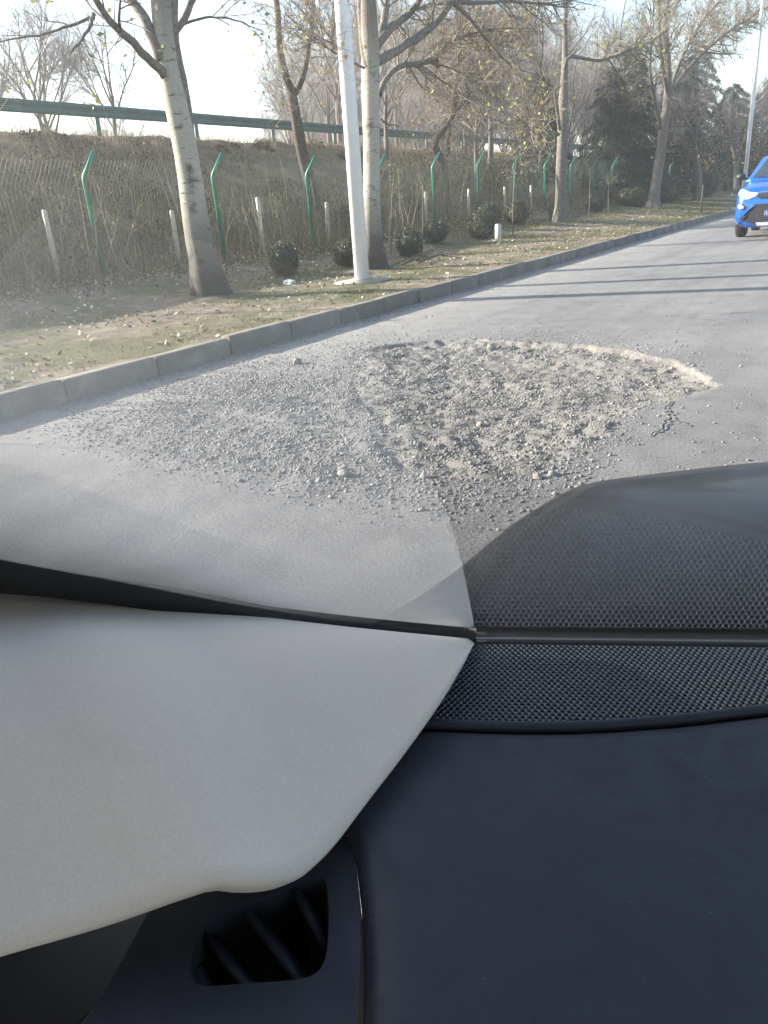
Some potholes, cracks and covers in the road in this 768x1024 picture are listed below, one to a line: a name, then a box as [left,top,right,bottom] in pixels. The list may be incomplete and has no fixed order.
pothole [352,339,717,480]
crack [650,401,692,436]
